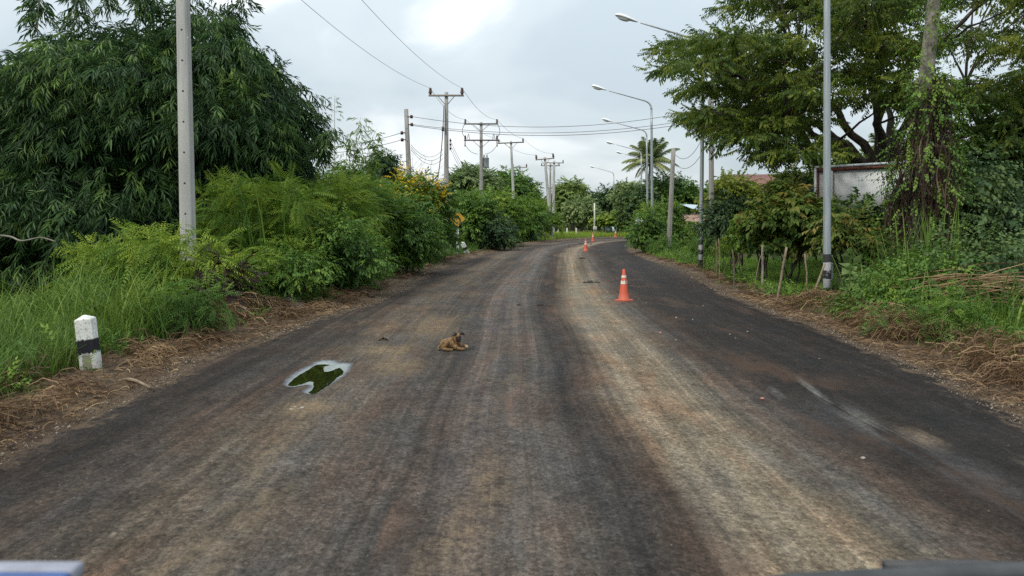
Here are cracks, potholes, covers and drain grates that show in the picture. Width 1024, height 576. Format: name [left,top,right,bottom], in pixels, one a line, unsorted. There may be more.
pothole [283,360,353,394]
